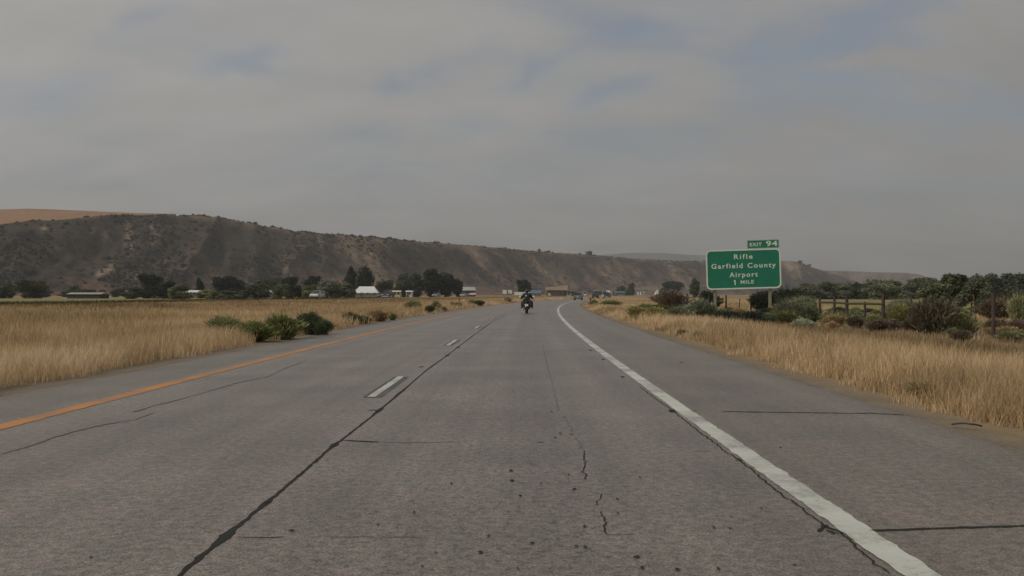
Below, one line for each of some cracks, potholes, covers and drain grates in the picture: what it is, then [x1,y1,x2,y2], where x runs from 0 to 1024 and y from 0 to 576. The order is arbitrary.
crack [542,346,607,534]
crack [1,361,304,454]
